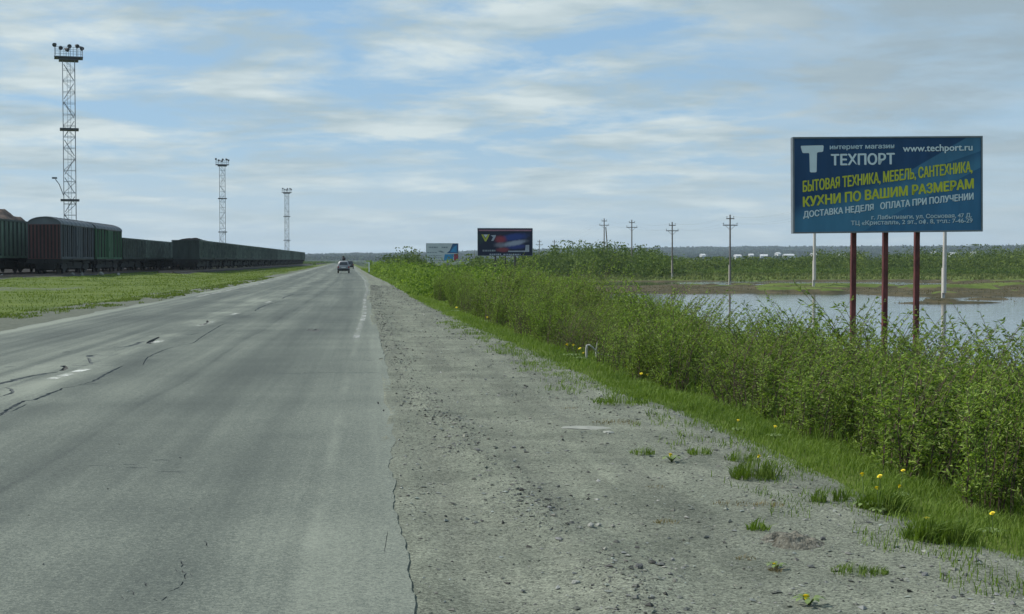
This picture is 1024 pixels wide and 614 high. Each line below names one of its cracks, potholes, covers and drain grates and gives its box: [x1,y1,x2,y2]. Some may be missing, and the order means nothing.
crack [122,541,208,601]
crack [0,322,229,416]
